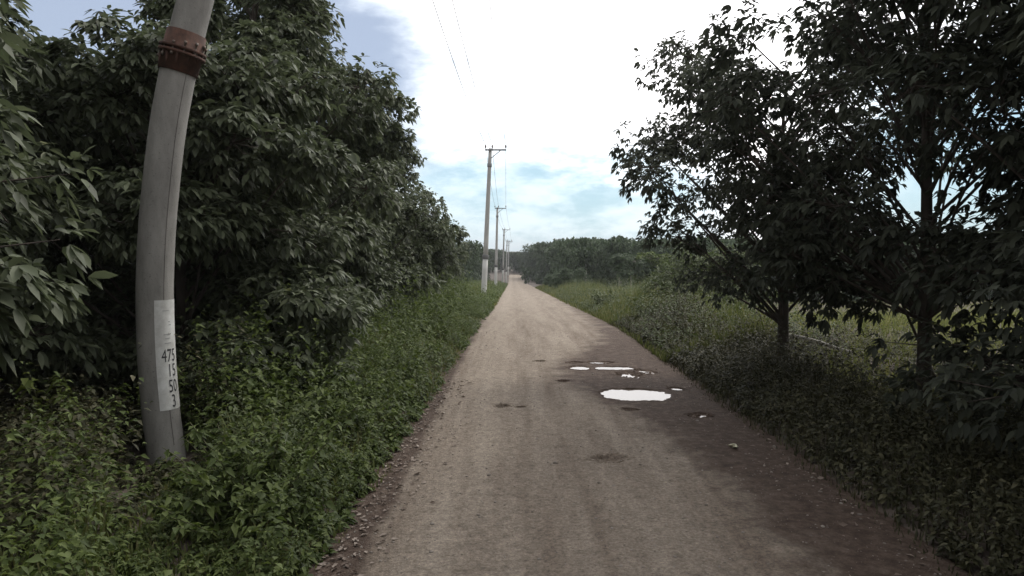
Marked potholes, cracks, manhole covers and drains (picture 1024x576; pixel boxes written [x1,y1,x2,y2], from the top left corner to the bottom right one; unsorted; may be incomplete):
pothole [608,369,649,379]
pothole [588,387,679,402]
pothole [583,453,636,463]
